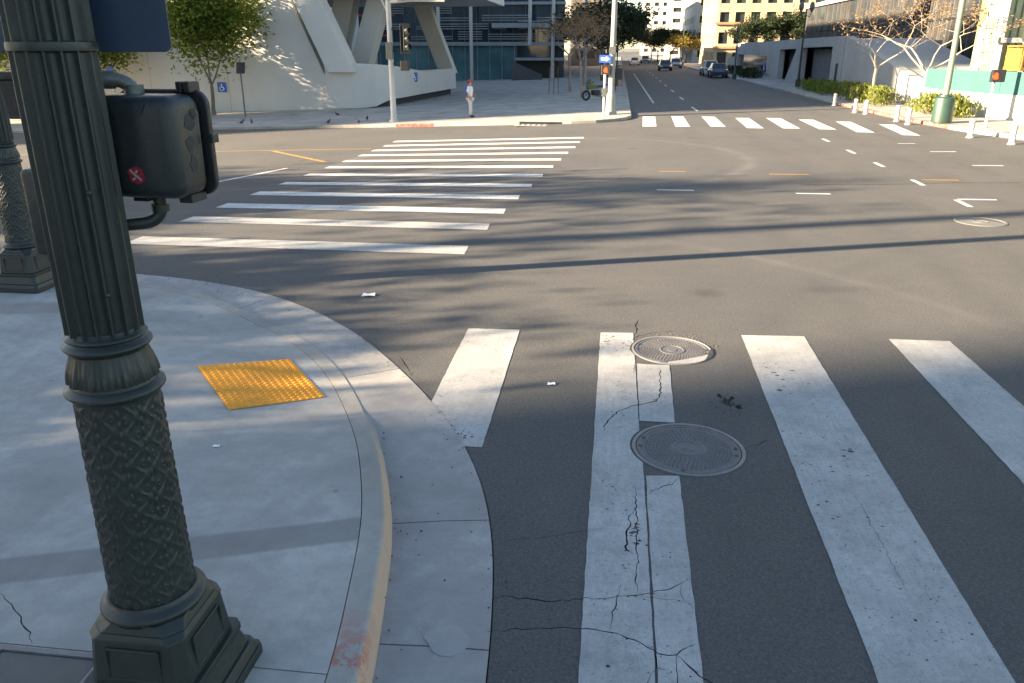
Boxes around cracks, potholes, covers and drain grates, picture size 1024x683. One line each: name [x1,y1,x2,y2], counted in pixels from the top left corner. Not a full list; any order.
manhole cover [954,217,1008,227]
manhole cover [631,336,714,365]
manhole cover [632,423,746,477]
crack [492,484,712,683]
crack [604,370,662,430]
crack [0,593,32,642]
